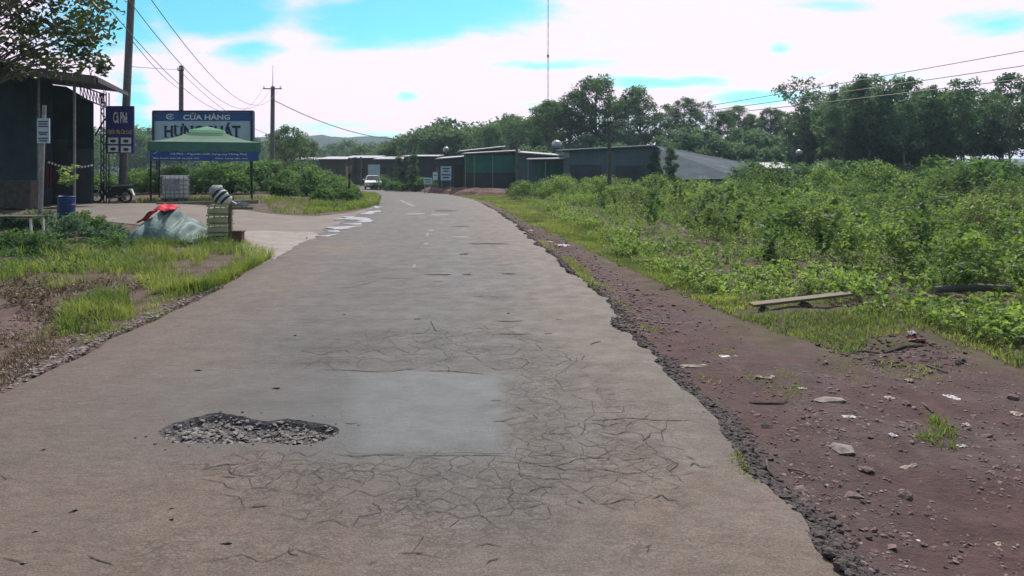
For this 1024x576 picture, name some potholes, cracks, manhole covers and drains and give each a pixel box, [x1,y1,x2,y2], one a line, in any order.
crack [191,320,716,563]
pothole [158,412,339,446]
